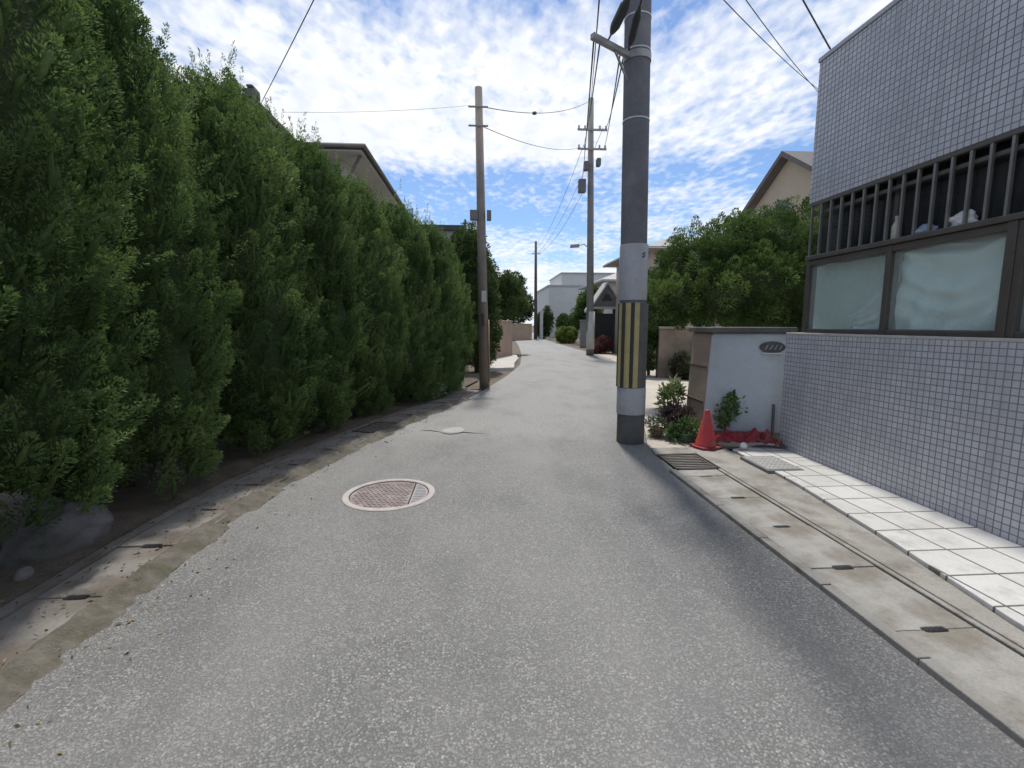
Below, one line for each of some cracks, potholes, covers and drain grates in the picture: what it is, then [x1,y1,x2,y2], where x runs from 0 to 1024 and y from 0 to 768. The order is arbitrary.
drain grate [353,421,398,433]
drain grate [657,454,719,470]
manhole cover [342,479,435,512]
